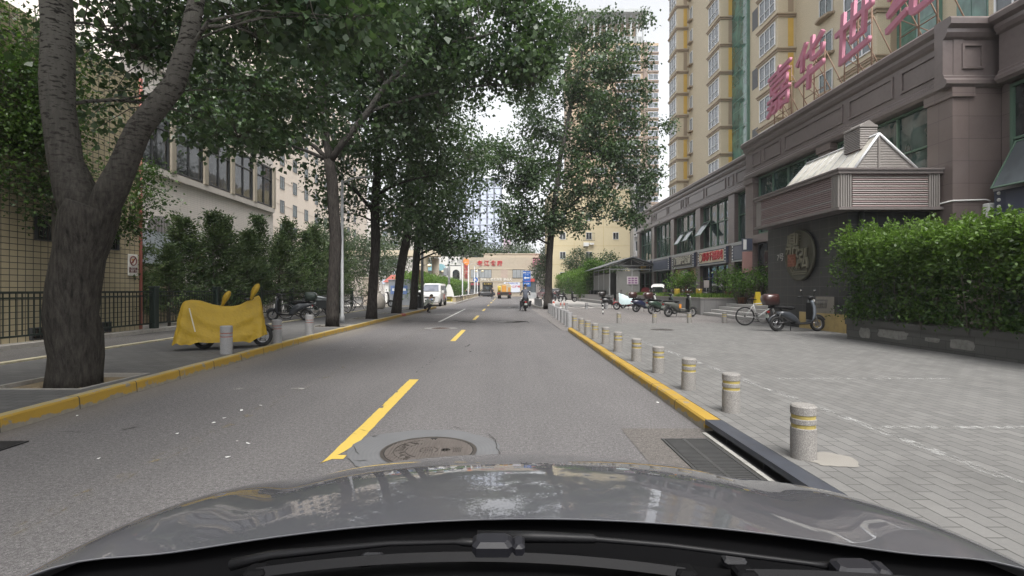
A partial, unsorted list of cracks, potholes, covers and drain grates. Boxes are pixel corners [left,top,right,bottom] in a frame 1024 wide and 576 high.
manhole cover [347,430,500,467]
drain grate [661,438,764,480]
